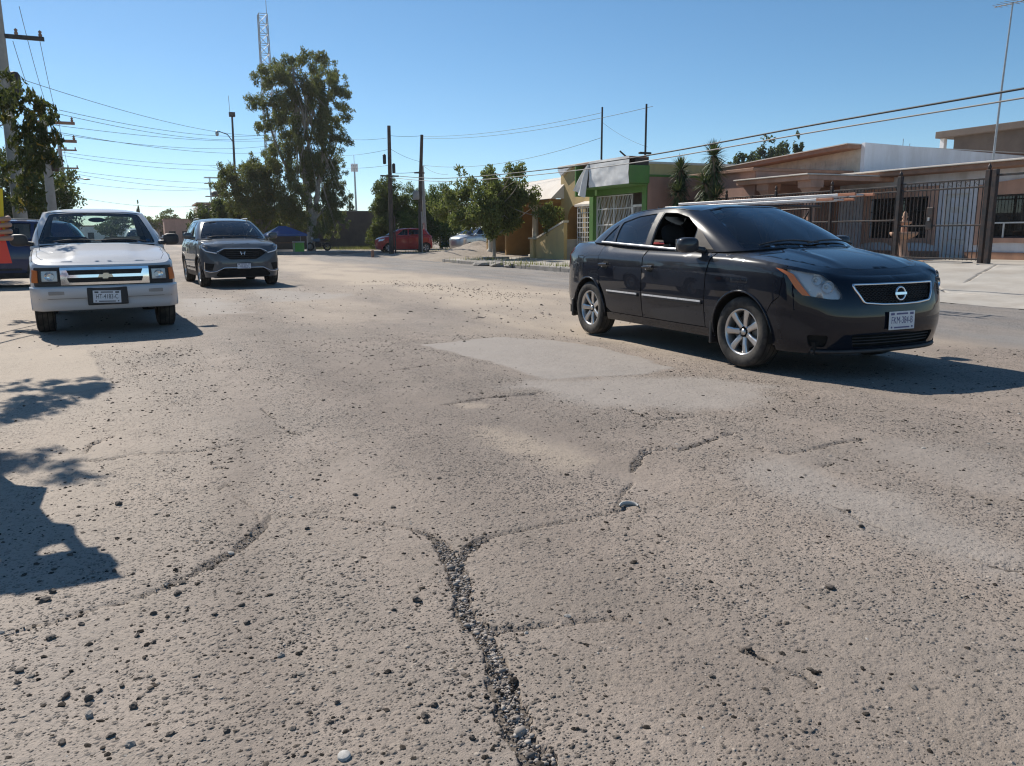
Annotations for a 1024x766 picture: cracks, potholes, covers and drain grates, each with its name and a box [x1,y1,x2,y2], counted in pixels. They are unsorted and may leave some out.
crack [753,440,862,467]
crack [5,486,272,639]
crack [284,433,734,766]
